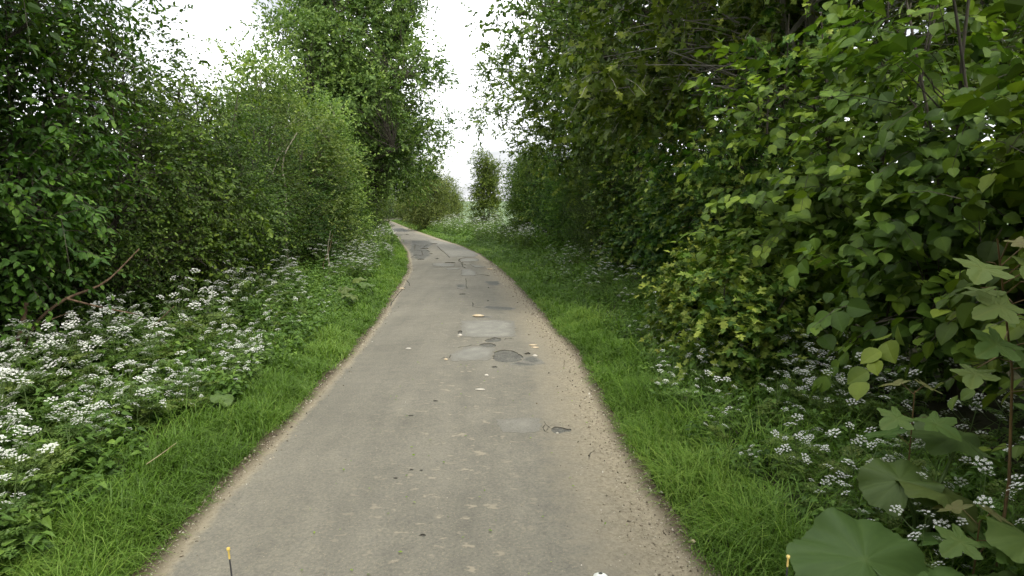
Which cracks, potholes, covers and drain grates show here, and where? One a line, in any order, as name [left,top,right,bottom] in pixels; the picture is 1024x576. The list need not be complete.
crack [406,234,489,308]
pothole [493,350,523,362]
